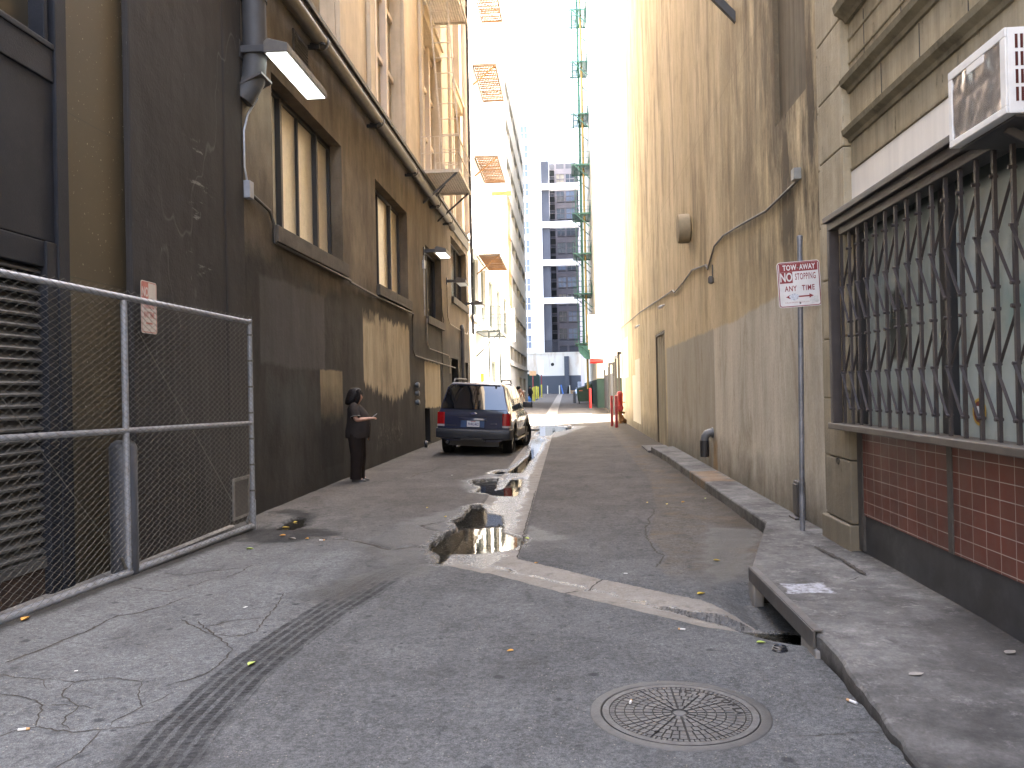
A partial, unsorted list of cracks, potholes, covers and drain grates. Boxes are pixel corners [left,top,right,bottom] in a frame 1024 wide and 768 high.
pothole [420,504,485,565]
pothole [269,517,310,531]
crack [644,507,671,567]
crack [0,565,284,768]
pothole [466,477,505,496]
manhole cover [590,681,773,752]
